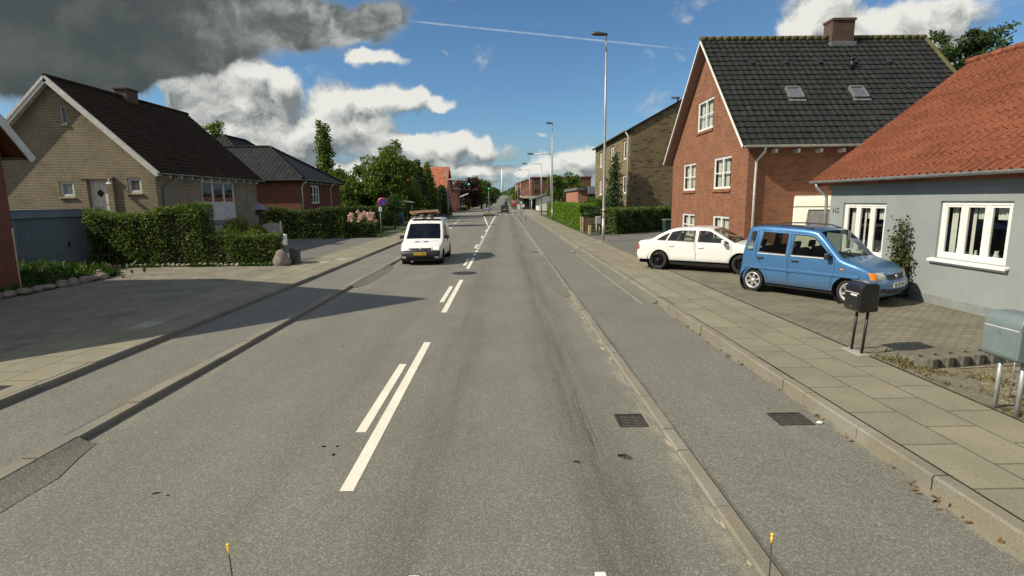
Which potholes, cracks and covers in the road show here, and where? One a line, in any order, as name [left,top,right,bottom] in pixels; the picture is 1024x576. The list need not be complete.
drain grate [766,412,816,426]
drain grate [614,414,649,427]
